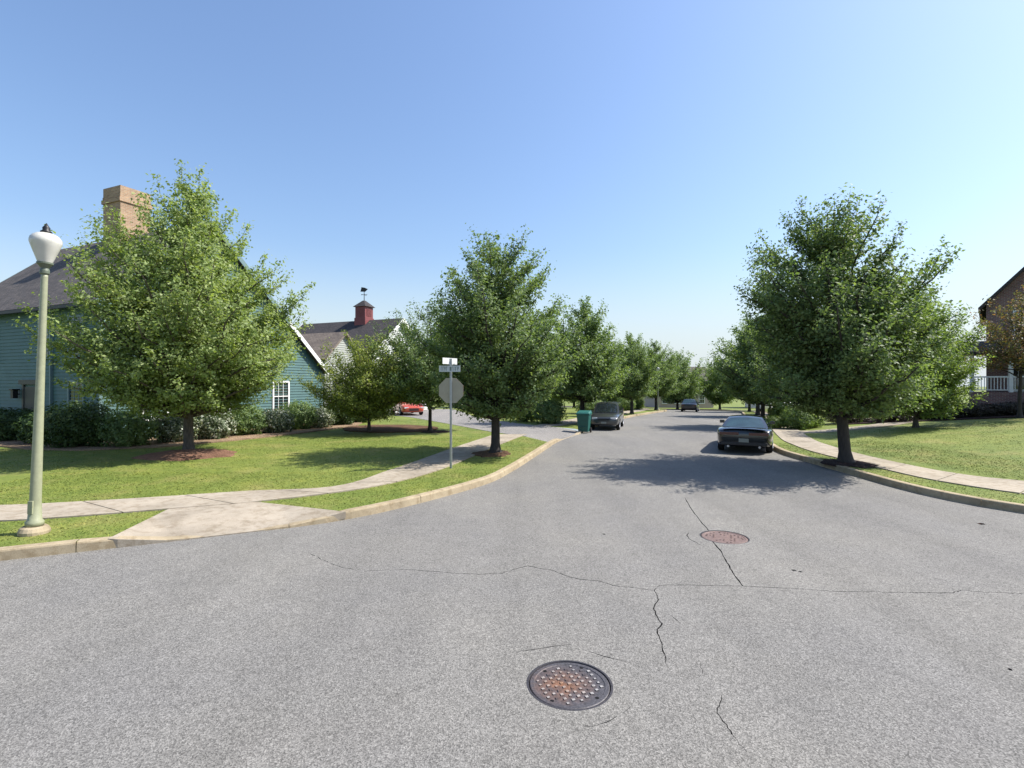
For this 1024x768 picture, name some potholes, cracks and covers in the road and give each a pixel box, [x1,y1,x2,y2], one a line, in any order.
manhole cover [700,530,750,544]
manhole cover [526,660,613,711]
crack [311,499,1023,665]
crack [716,694,741,746]
